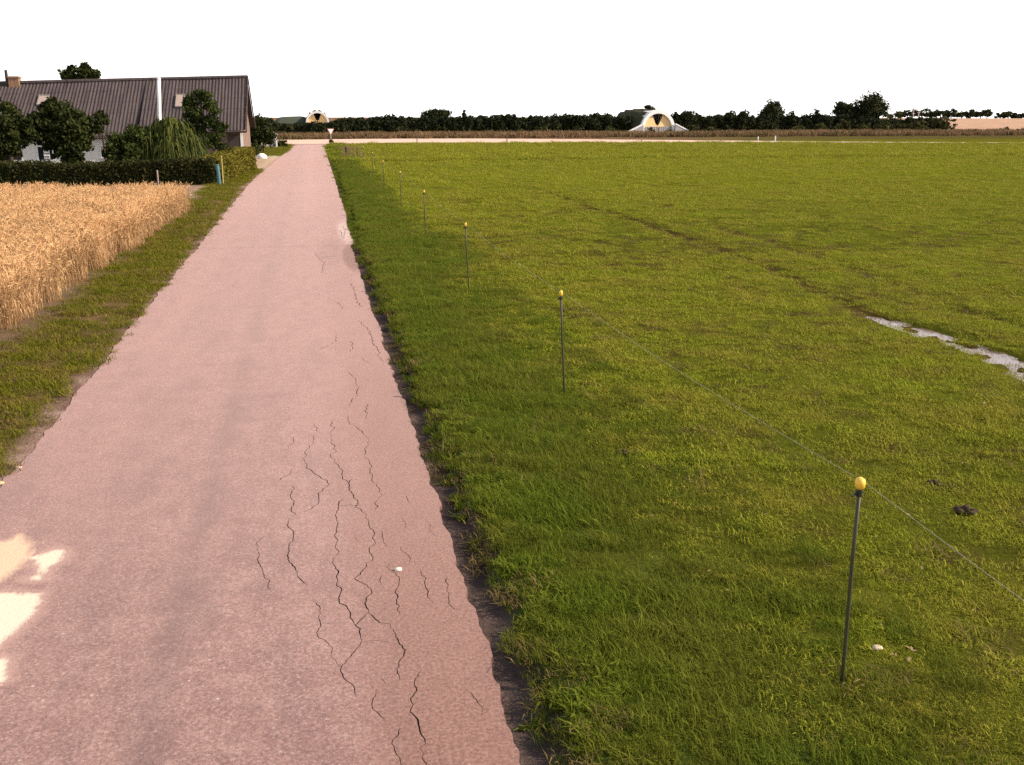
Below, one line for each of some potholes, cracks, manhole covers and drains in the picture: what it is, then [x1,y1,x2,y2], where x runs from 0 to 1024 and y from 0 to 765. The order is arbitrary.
crack [400,547,463,610]
crack [303,286,427,765]
crack [278,438,307,585]
